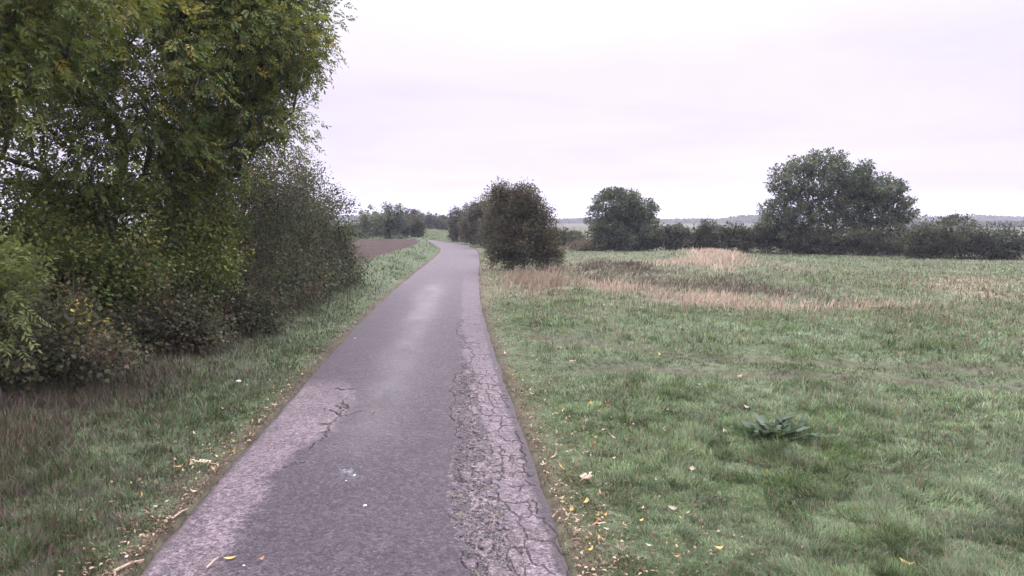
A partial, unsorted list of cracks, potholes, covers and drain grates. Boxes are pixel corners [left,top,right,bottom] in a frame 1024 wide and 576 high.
crack [446,320,569,576]
crack [282,388,359,469]
